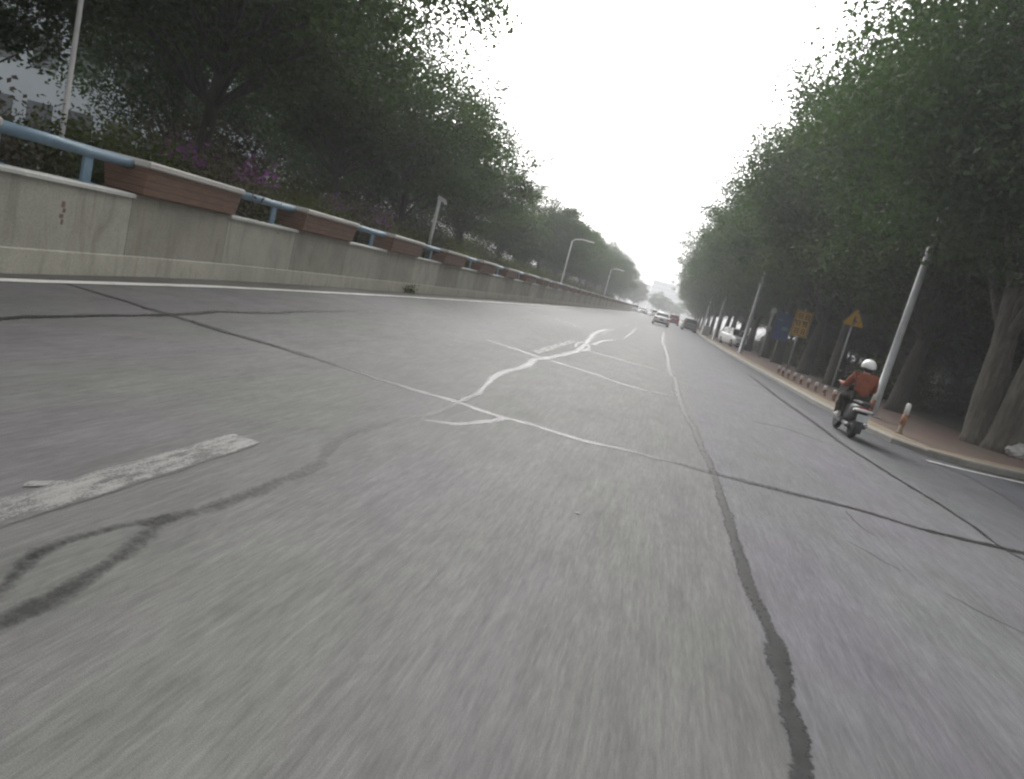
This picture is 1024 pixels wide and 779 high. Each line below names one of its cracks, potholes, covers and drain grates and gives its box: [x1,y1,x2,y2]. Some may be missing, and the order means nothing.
crack [750,376,1024,572]
crack [946,593,1023,633]
